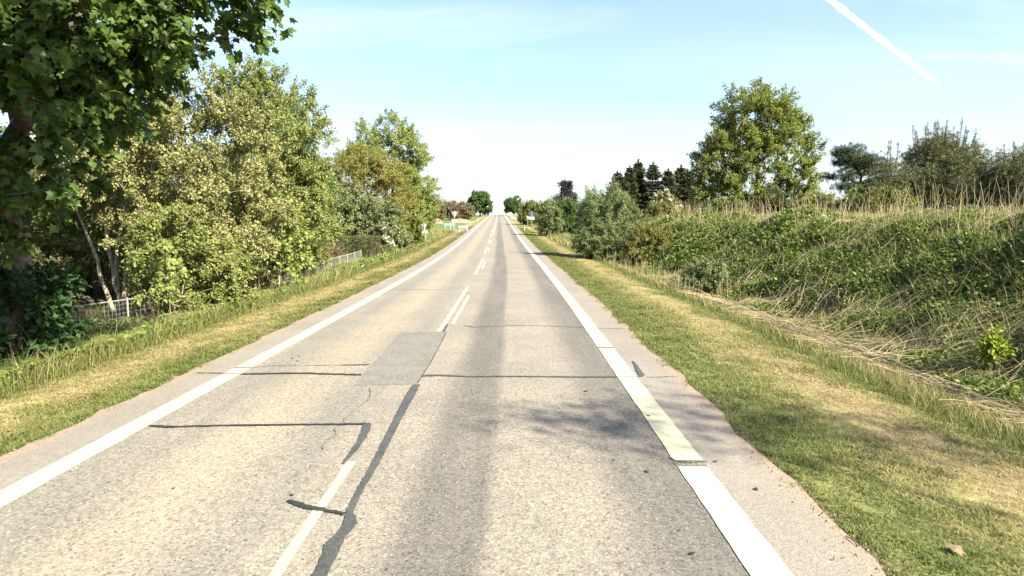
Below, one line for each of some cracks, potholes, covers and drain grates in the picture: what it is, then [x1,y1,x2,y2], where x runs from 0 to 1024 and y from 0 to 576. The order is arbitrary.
crack [322,387,372,450]
